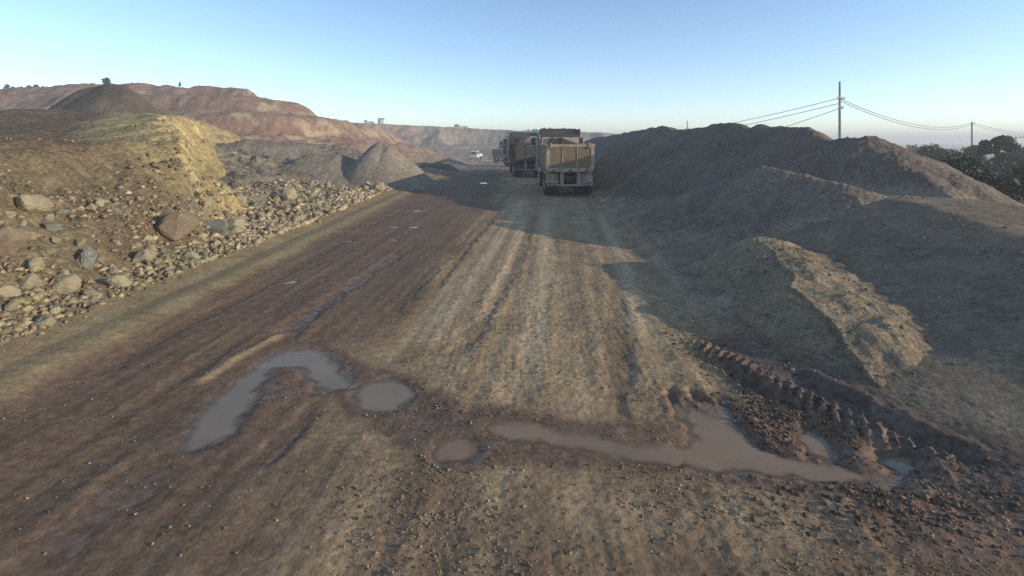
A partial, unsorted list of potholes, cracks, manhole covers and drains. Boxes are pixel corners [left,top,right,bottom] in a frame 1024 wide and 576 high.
pothole [479,415,684,470]
pothole [661,393,905,492]
pothole [341,376,422,417]
pothole [421,430,491,471]
pothole [170,367,279,455]
pothole [245,344,365,395]
